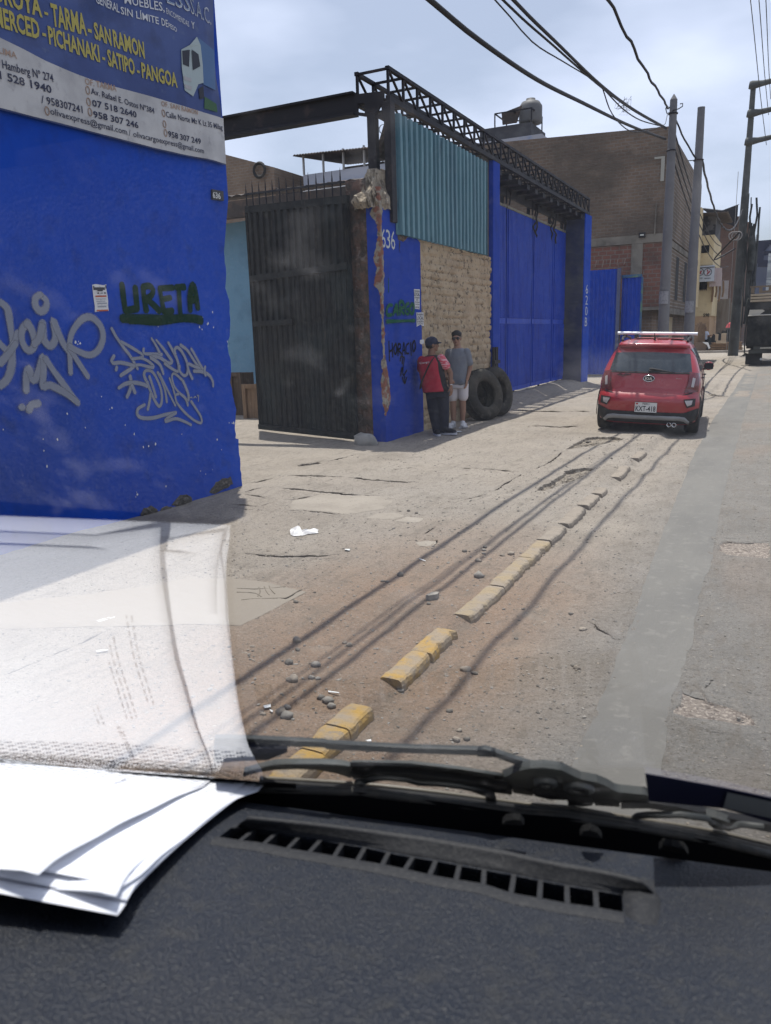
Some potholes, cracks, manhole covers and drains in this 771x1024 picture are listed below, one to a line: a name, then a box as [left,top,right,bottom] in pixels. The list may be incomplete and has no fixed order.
crack [234,550,352,561]
crack [223,449,569,508]
pothole [668,682,770,741]
crack [573,609,639,646]
pothole [532,467,598,492]
pothole [563,436,627,450]
